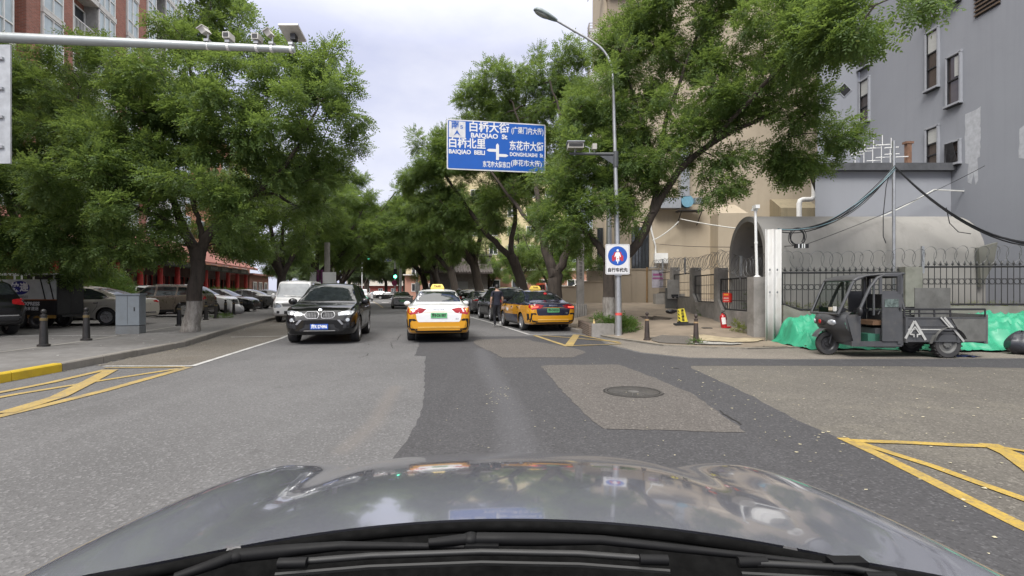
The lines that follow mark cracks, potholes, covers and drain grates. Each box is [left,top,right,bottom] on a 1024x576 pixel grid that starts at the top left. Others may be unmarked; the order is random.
manhole cover [603,386,665,398]
